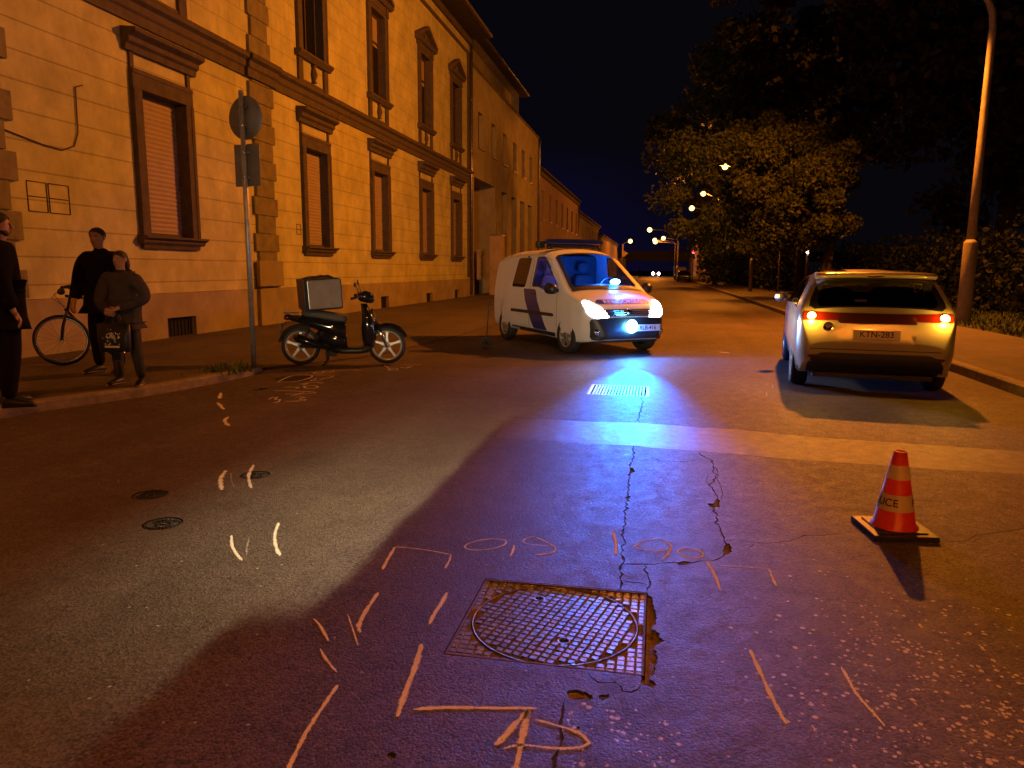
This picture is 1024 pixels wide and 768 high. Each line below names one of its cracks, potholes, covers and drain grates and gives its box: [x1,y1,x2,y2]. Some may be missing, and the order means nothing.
utility cover [241,471,270,479]
utility cover [132,491,168,500]
pothole [567,690,593,700]
drain grate [586,384,650,397]
manhole cover [443,578,648,681]
crack [619,446,864,592]
pothole [641,595,665,687]
utility cover [142,518,183,530]
